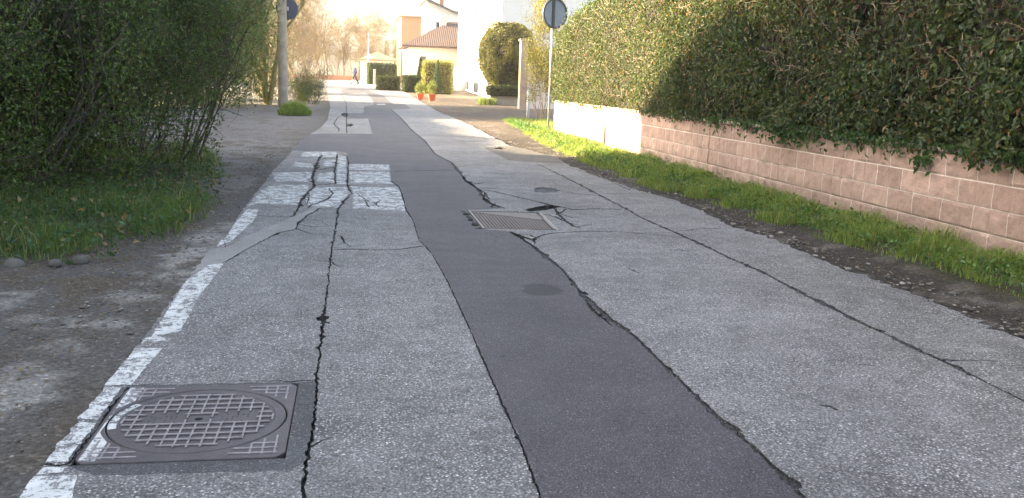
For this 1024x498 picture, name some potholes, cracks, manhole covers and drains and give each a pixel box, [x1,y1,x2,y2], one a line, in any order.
crack [44,154,541,498]
manhole cover [75,383,298,466]
crack [463,164,1022,400]
